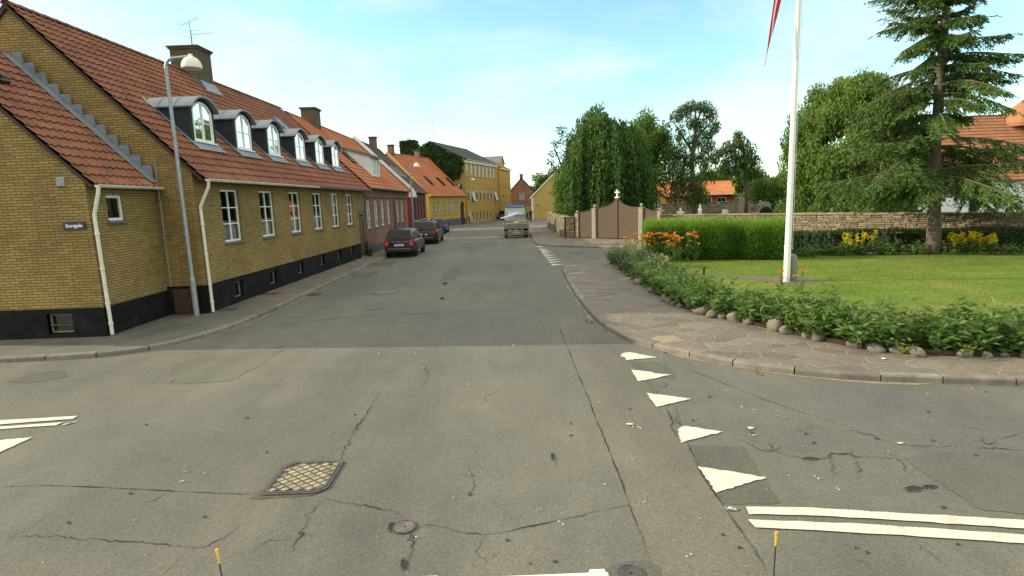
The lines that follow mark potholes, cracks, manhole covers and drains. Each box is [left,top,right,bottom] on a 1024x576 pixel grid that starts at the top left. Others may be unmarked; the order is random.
crack [3,523,242,574]
crack [292,496,399,552]
crack [744,427,944,474]
crack [402,505,625,572]
manhole cover [393,520,416,534]
